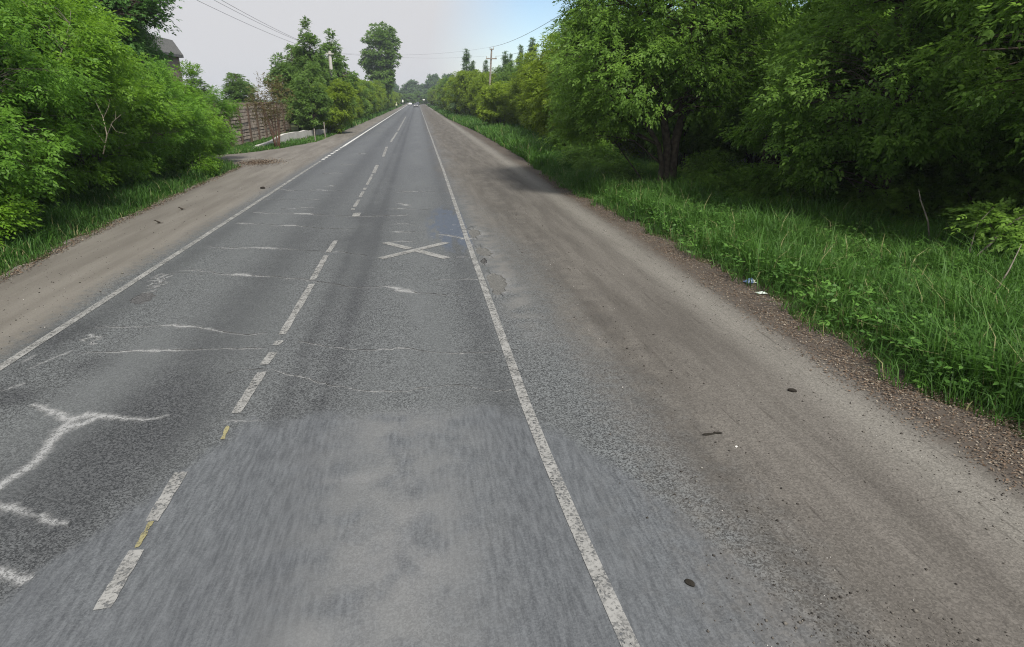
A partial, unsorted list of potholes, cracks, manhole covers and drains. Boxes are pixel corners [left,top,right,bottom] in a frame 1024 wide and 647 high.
crack [226,368,511,392]
crack [0,383,167,527]
crack [213,246,363,255]
crack [25,324,266,366]
crack [298,340,490,354]
crack [0,567,34,584]
crack [143,268,478,295]
